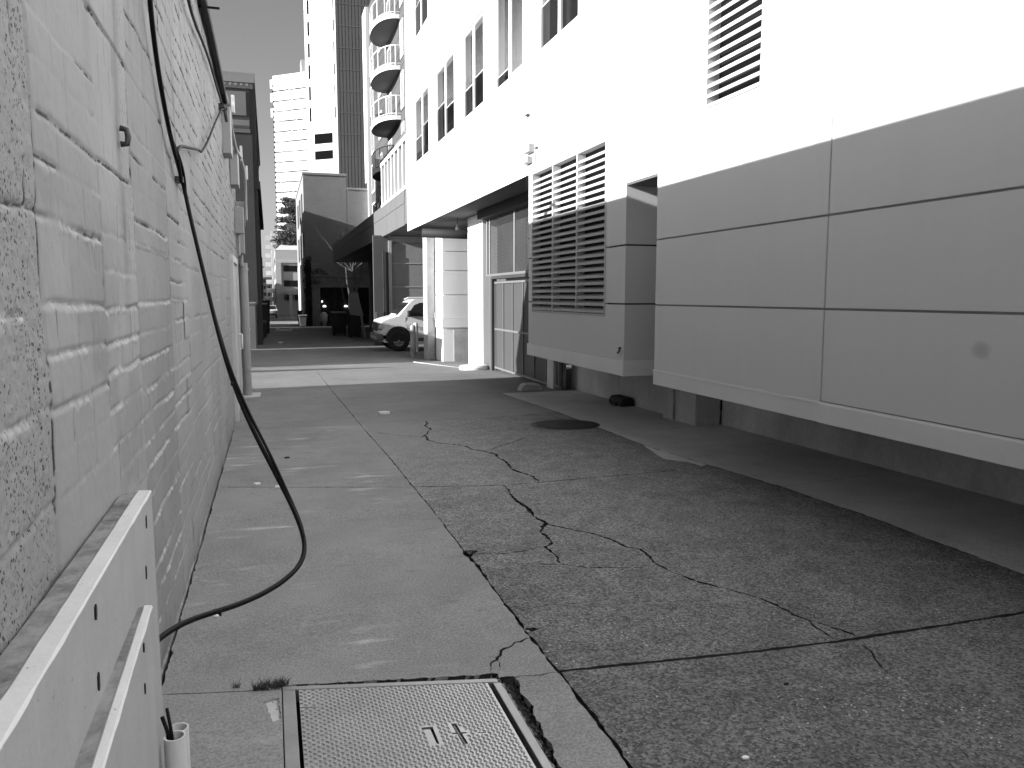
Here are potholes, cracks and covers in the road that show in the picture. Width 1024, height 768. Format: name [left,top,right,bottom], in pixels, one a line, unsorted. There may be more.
utility cover [282,679,553,768]
manhole cover [530,419,600,430]
crack [415,422,882,668]
